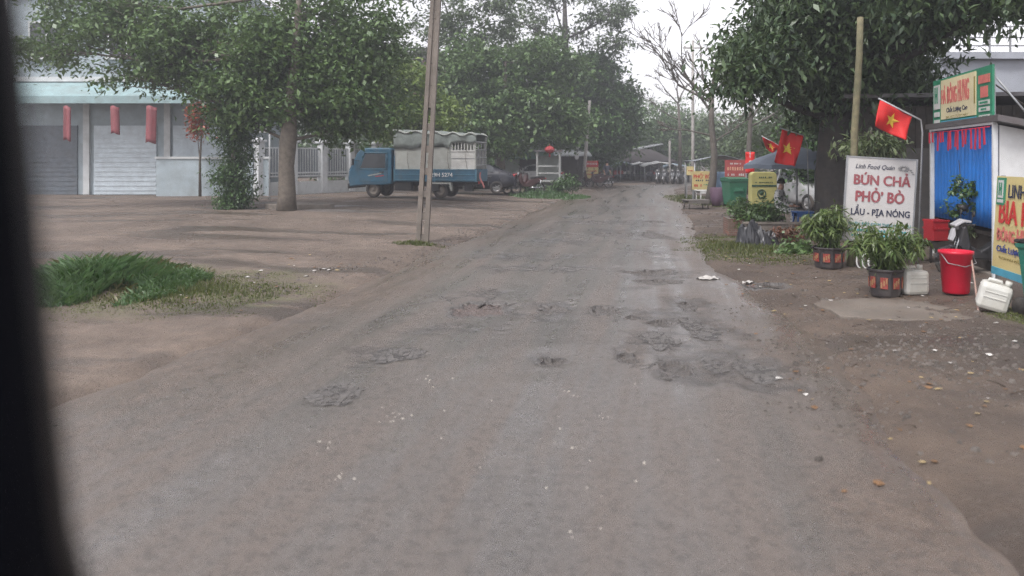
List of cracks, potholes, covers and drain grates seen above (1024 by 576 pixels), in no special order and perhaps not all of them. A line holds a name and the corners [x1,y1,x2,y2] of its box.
pothole [587,305,621,316]
pothole [659,359,697,378]
pothole [642,319,672,328]
pothole [536,304,569,315]
pothole [617,269,678,277]
pothole [443,300,512,320]
pothole [538,356,568,367]
pothole [614,352,640,365]
